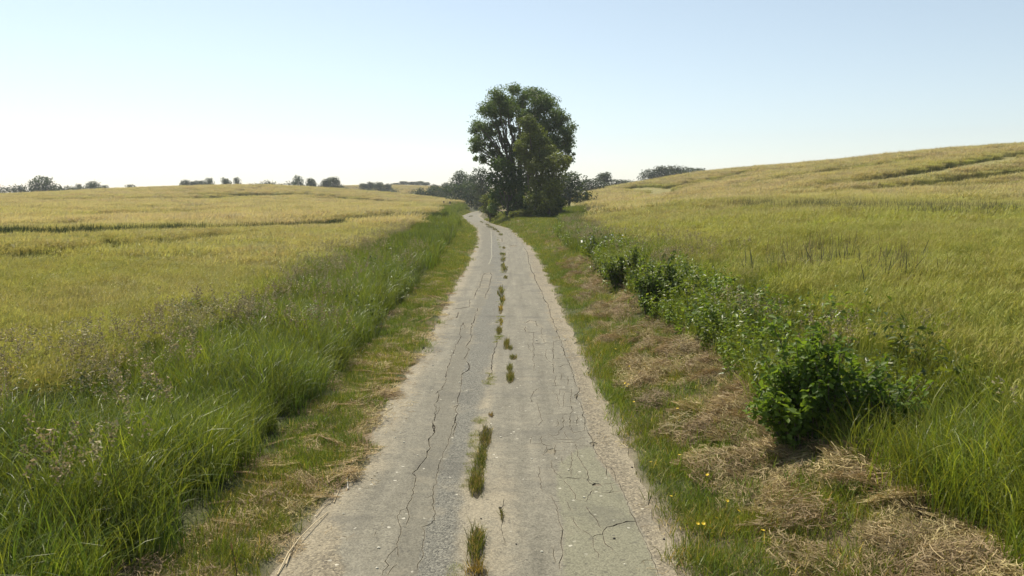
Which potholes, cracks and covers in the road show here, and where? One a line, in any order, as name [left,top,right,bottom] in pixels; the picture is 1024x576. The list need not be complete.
crack [374,273,492,575]
crack [524,253,658,572]
